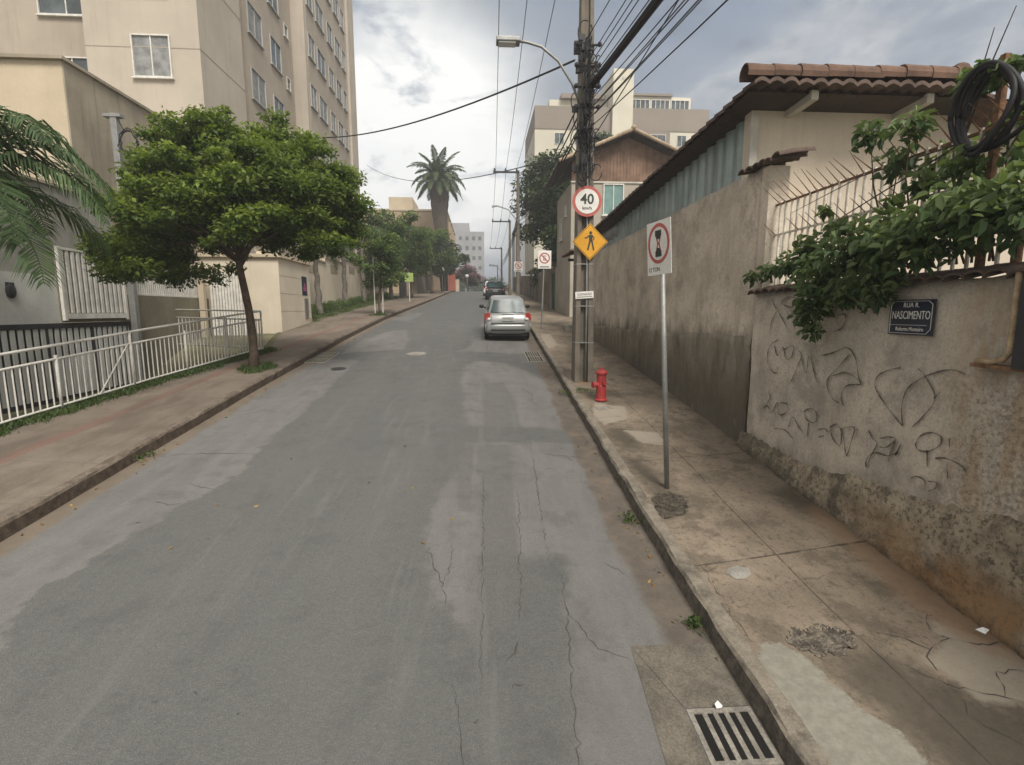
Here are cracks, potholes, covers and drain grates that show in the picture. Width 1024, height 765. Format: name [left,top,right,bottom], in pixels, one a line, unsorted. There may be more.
crack [561,567,627,761]
drain grate [524,352,545,362]
drain grate [304,352,340,363]
pothole [651,490,689,519]
crack [877,615,1022,742]
pothole [785,623,858,660]
drain grate [686,706,784,765]
crack [517,442,582,612]
